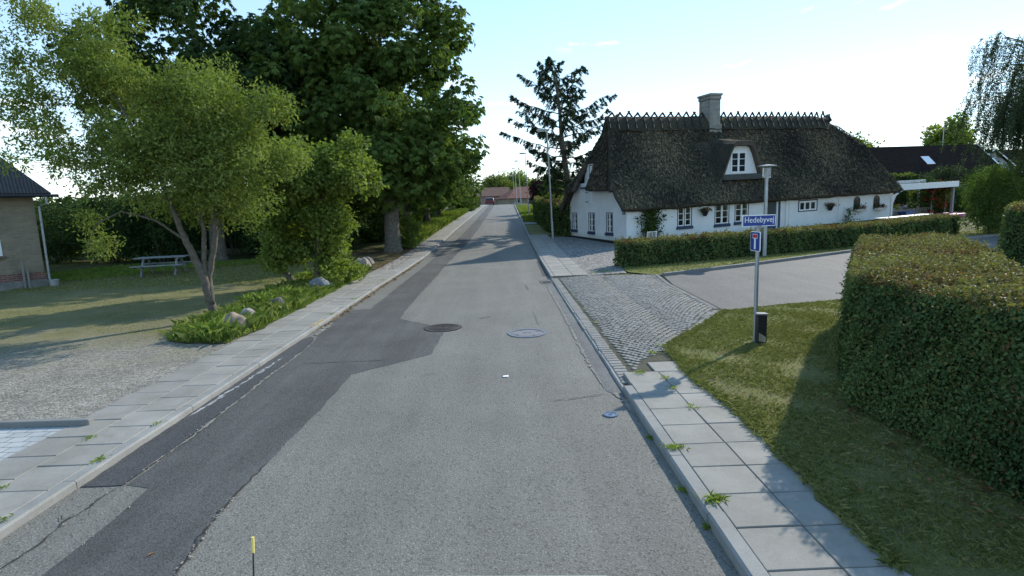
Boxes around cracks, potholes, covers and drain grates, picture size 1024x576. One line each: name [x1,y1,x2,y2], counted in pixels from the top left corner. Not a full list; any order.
crack [173,461,269,576]
manhole cover [508,328,547,338]
crack [0,488,116,569]
manhole cover [424,323,462,332]
